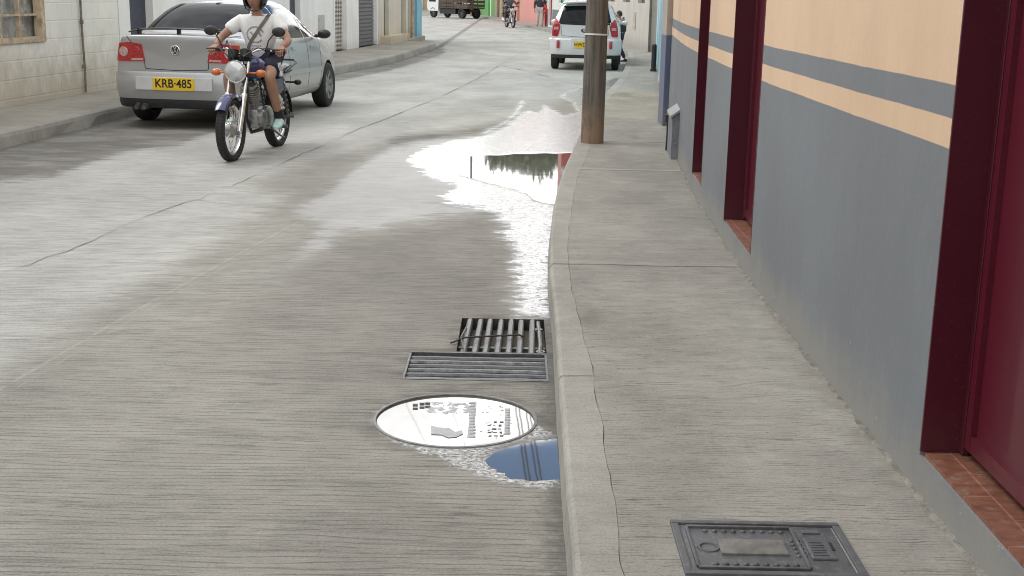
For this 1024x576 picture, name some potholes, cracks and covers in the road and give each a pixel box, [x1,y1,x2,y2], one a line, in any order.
drain grate [450,318,547,353]
utility cover [670,519,870,576]
drain grate [402,351,549,382]
manhole cover [373,393,537,454]
